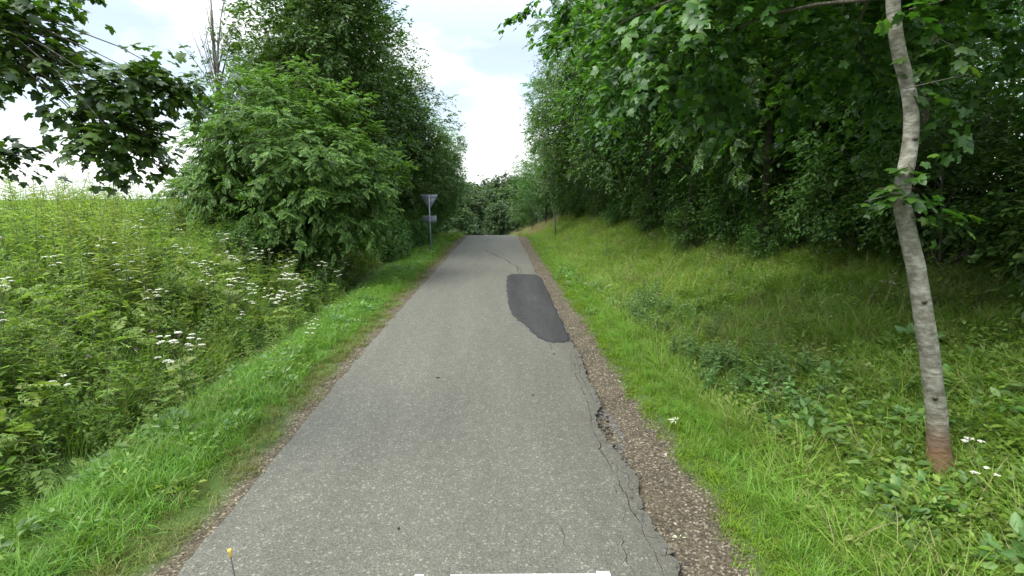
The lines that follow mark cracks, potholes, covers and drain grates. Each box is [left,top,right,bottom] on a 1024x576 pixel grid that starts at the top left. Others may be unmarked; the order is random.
crack [571,354,667,575]
